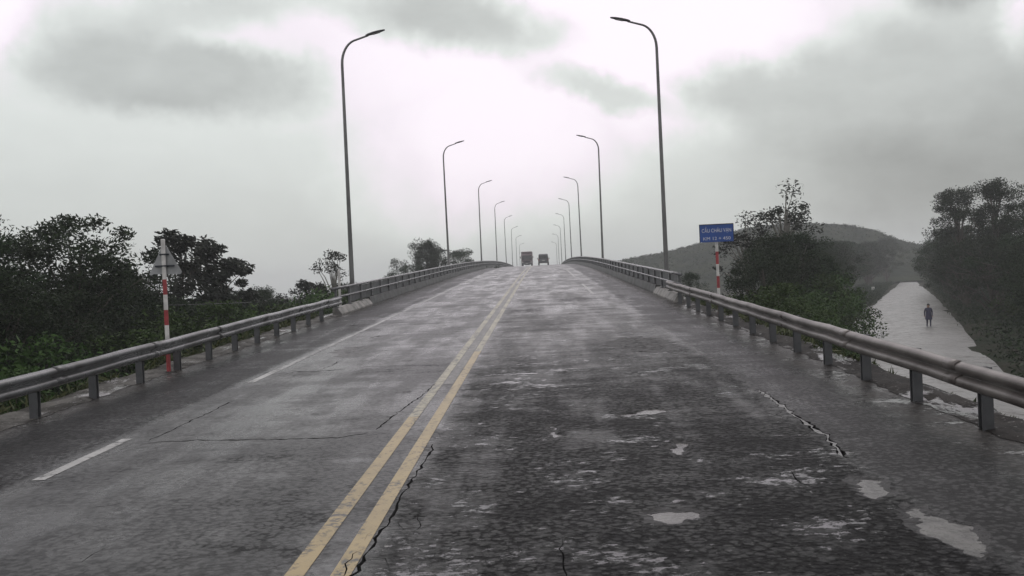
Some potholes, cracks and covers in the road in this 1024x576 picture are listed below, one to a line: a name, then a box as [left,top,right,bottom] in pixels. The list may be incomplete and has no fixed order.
crack [150,386,432,443]
crack [344,444,443,576]
crack [559,541,568,576]
pothole [609,407,669,417]
pothole [895,502,996,561]
pothole [840,475,903,500]
crack [757,389,847,486]
pothole [659,437,697,460]
pothole [635,506,714,526]
